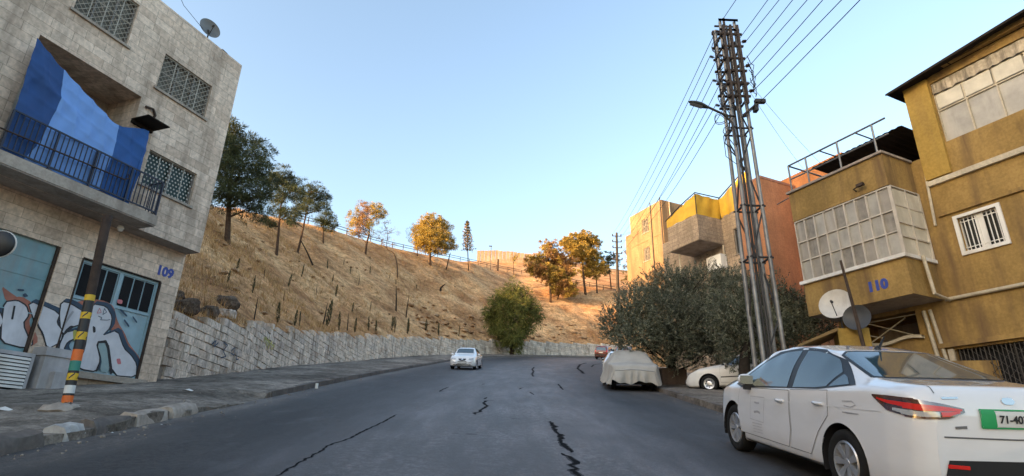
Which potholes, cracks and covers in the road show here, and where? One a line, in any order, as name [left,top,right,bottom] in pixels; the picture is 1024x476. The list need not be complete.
crack [549,421,584,476]
crack [276,414,397,476]
crack [557,363,596,390]
crack [473,384,515,419]
